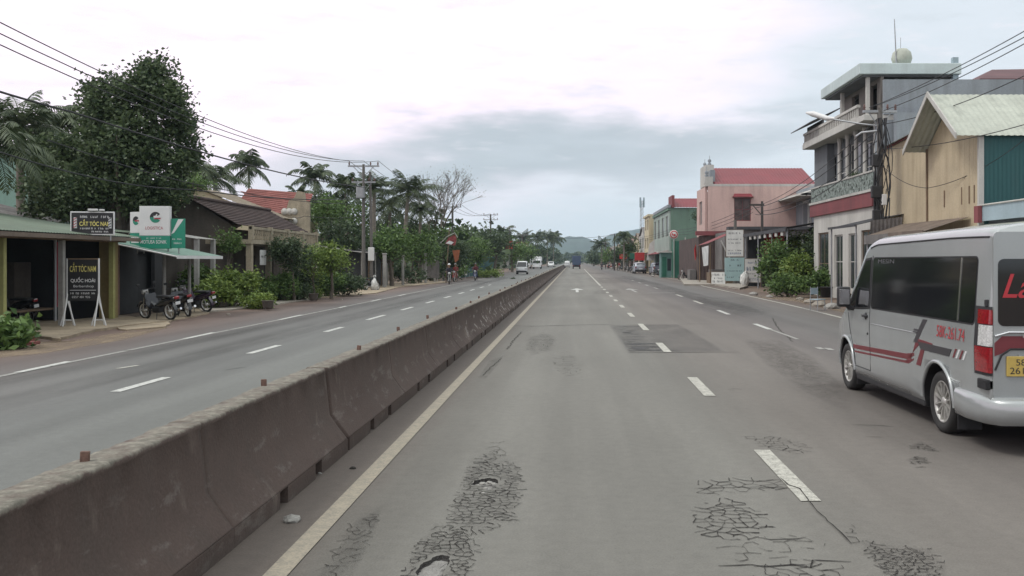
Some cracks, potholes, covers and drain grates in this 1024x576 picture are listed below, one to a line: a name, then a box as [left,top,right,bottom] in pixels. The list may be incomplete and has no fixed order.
crack [318,514,379,576]
crack [745,436,810,454]
crack [693,477,945,576]
pothole [415,555,450,576]
crack [400,441,523,576]
pothole [471,478,498,491]
